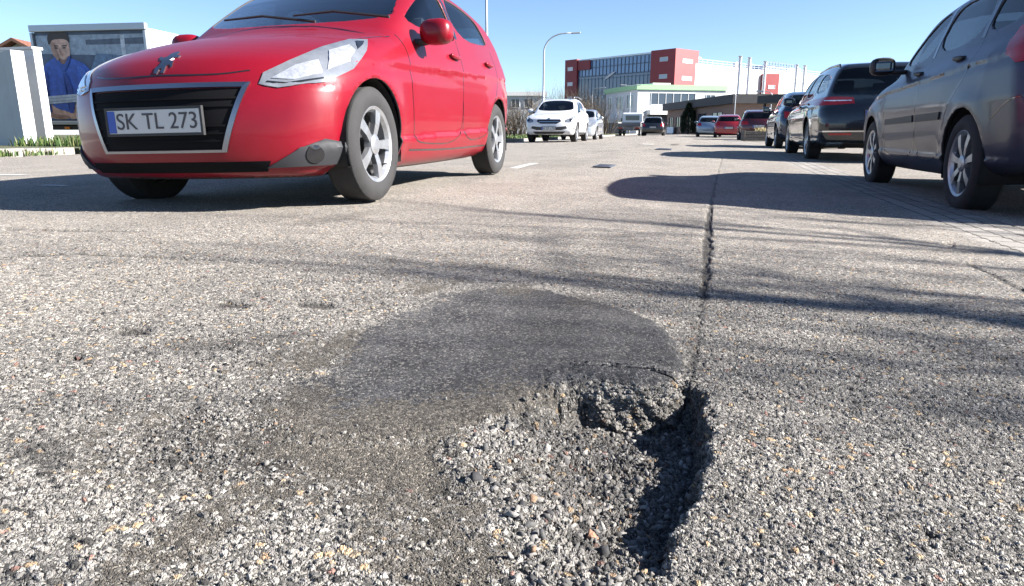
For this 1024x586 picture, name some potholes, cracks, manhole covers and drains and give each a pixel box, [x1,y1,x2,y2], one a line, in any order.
crack [963,262,1024,293]
pothole [454,376,720,586]
